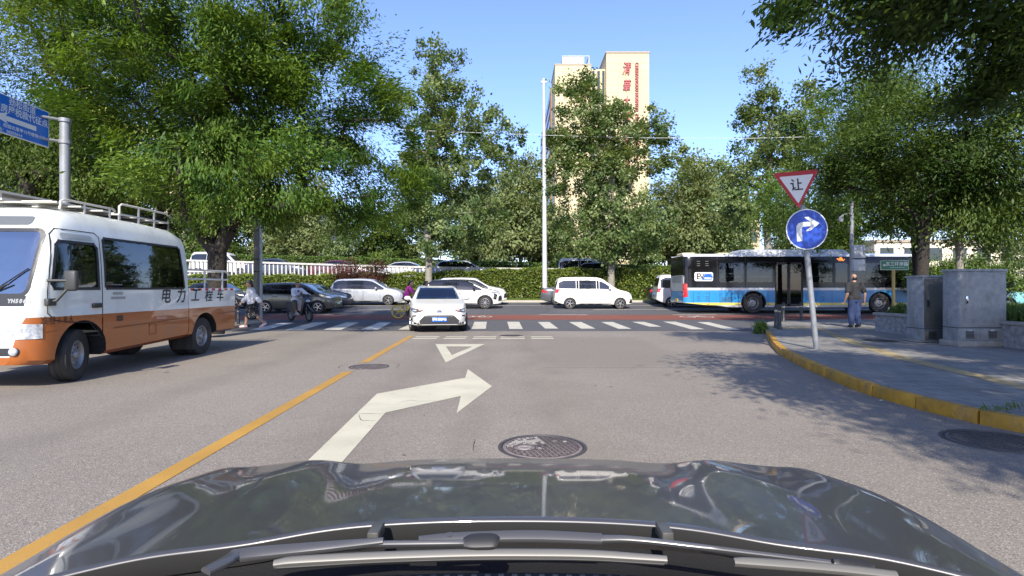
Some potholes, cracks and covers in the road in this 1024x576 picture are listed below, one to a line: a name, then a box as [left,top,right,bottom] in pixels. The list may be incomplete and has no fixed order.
manhole cover [939,429,1024,454]
manhole cover [498,434,587,459]
